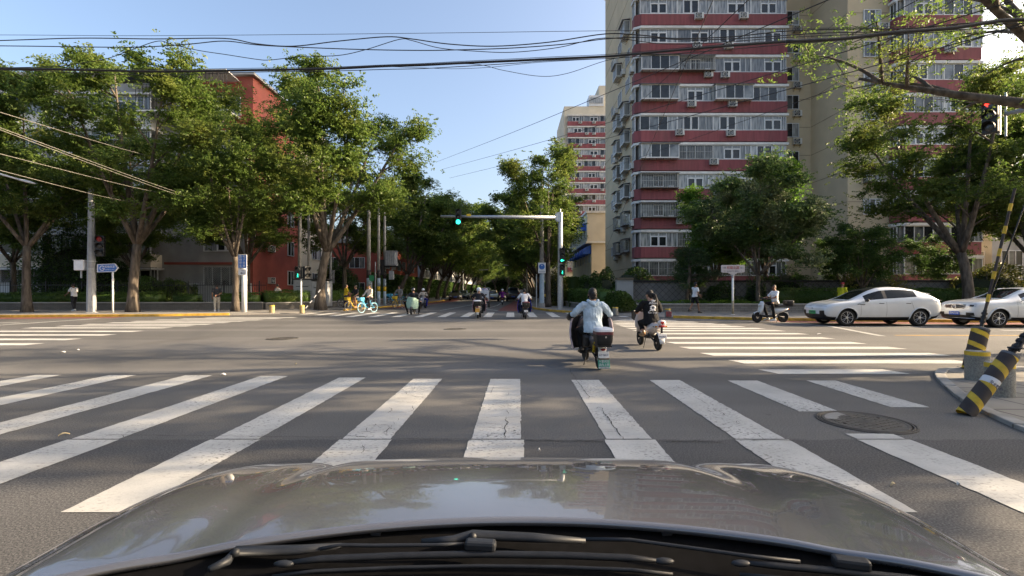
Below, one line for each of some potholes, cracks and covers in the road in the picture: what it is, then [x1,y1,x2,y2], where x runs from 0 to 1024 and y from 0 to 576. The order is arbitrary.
manhole cover [815,411,920,435]
